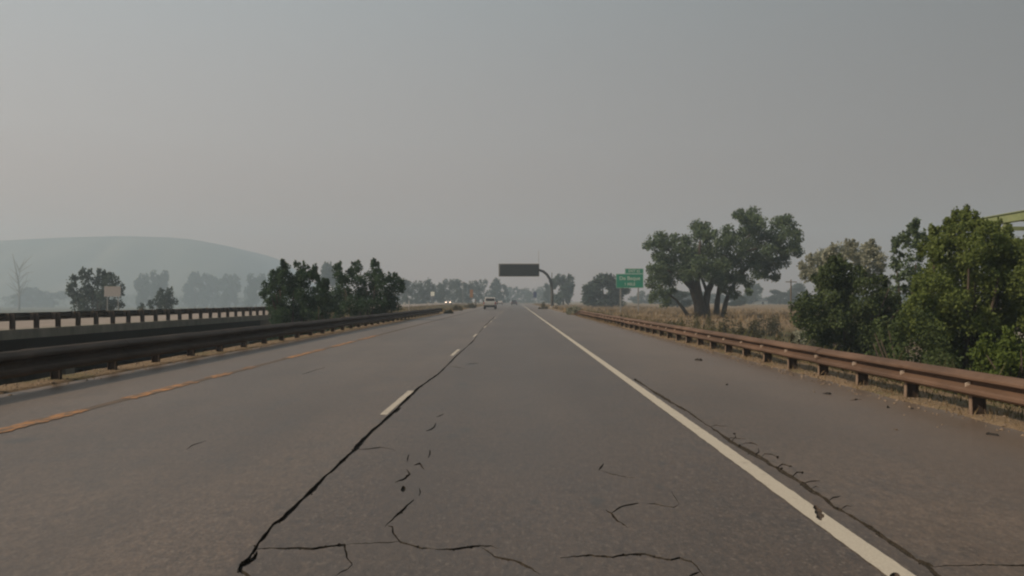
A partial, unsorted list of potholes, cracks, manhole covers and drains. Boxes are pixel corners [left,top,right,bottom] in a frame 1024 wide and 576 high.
crack [606,491,679,528]
crack [257,447,540,576]
crack [561,553,704,576]
